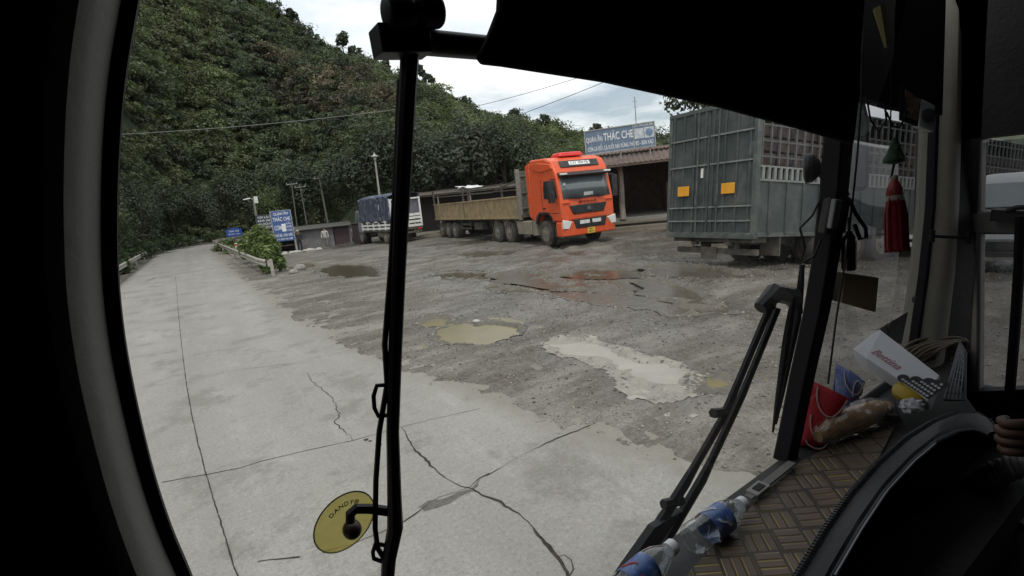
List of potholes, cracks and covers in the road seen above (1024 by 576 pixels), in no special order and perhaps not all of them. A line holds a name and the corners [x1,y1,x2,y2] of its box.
pothole [479,268,668,296]
pothole [420,317,546,348]
pothole [598,276,731,313]
pothole [532,286,746,318]
crack [257,425,591,576]
pothole [539,265,651,284]
pothole [423,270,497,282]
pothole [313,263,384,278]
pothole [540,334,707,399]
crack [149,272,480,576]
